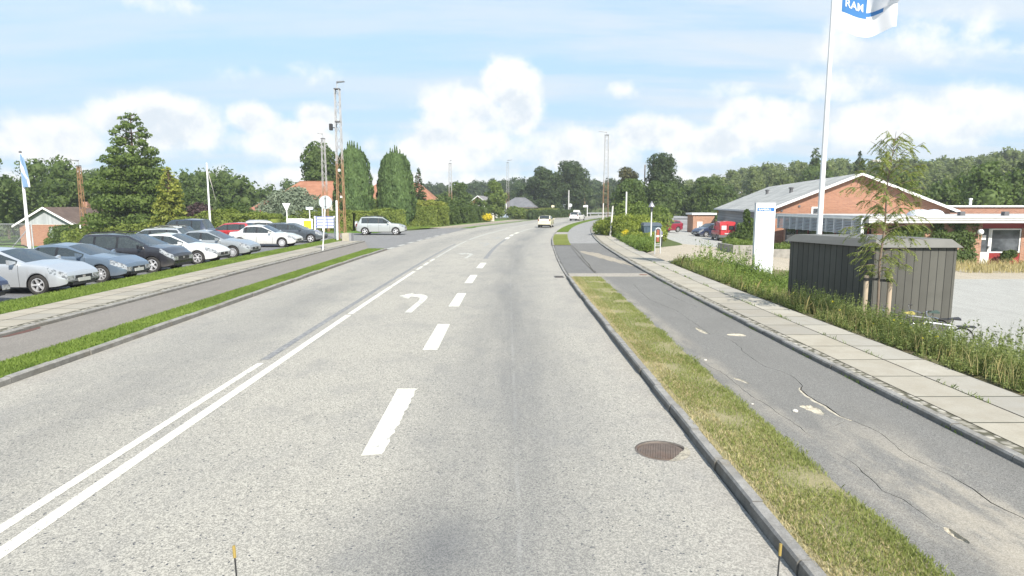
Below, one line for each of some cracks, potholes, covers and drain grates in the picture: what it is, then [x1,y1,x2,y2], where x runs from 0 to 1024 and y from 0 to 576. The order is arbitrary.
crack [638,289,1024,519]
manhole cover [635,441,684,461]
